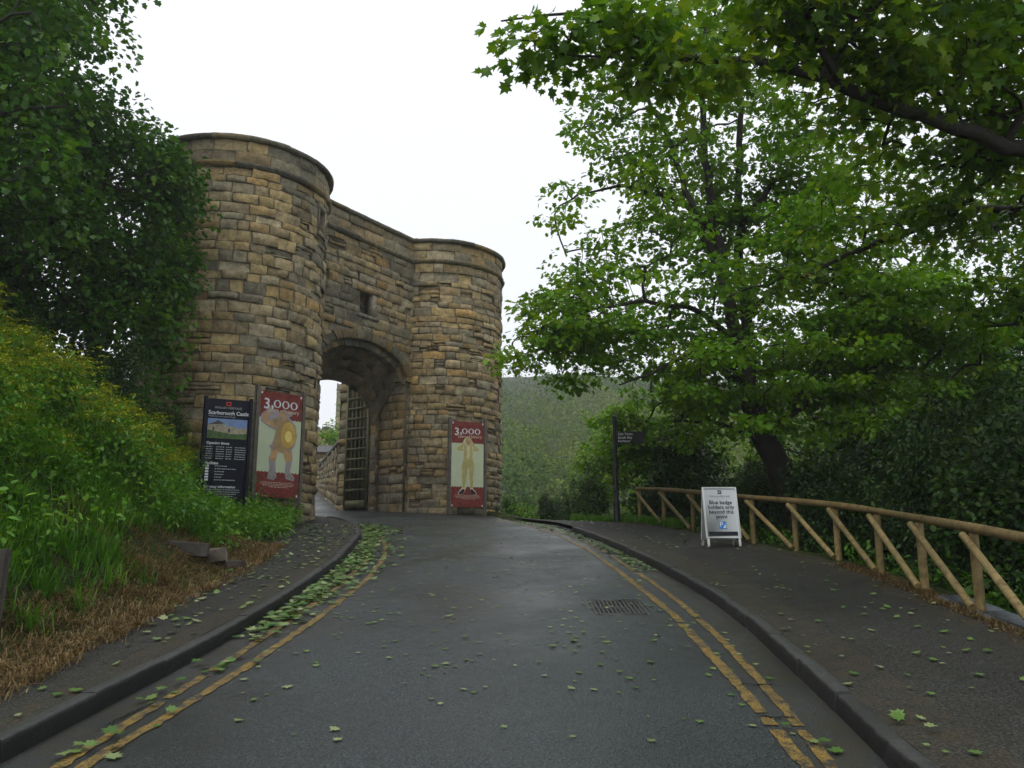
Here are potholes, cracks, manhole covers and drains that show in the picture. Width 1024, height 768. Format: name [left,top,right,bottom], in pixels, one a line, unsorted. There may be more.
drain grate [587,599,653,615]
